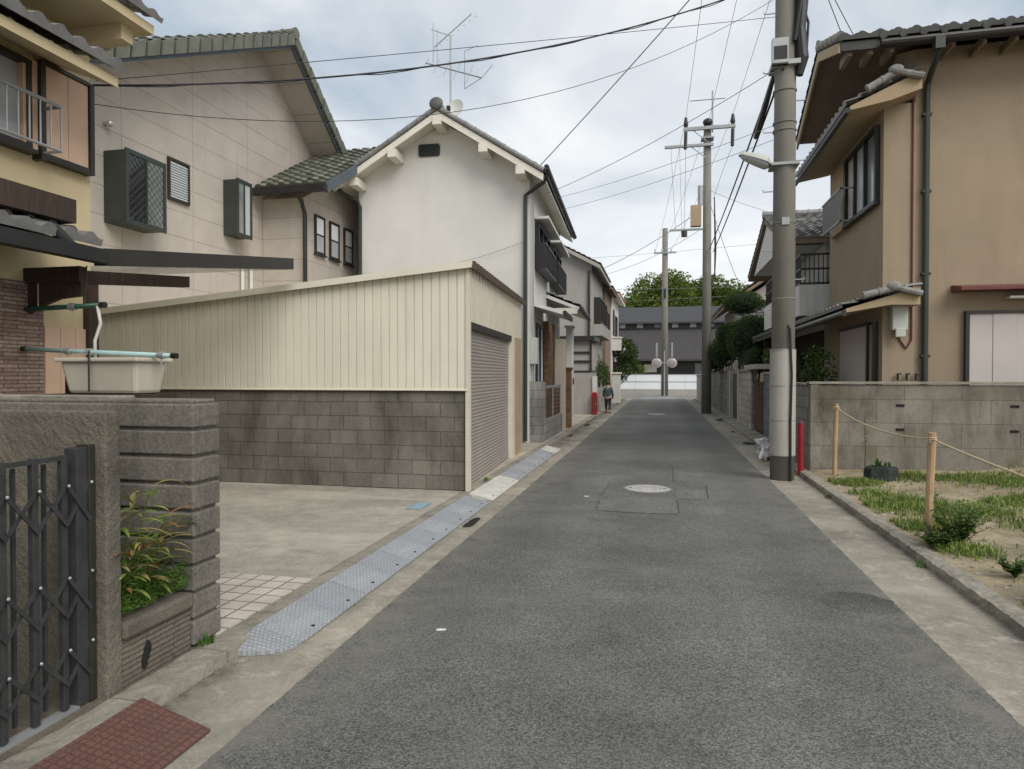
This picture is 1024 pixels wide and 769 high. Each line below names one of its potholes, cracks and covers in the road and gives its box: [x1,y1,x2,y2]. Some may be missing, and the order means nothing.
manhole cover [623,484,673,493]
